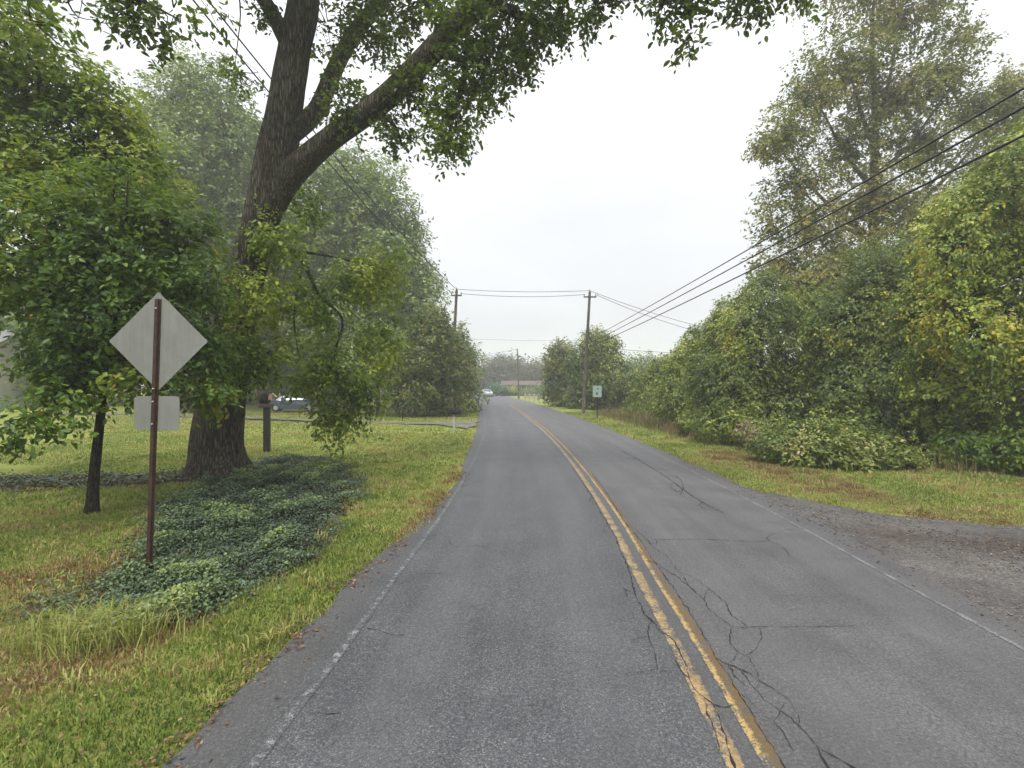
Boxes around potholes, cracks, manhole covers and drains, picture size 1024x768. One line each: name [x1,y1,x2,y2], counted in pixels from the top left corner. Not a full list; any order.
crack [622,539,856,768]
crack [624,452,721,512]
crack [592,474,791,556]
